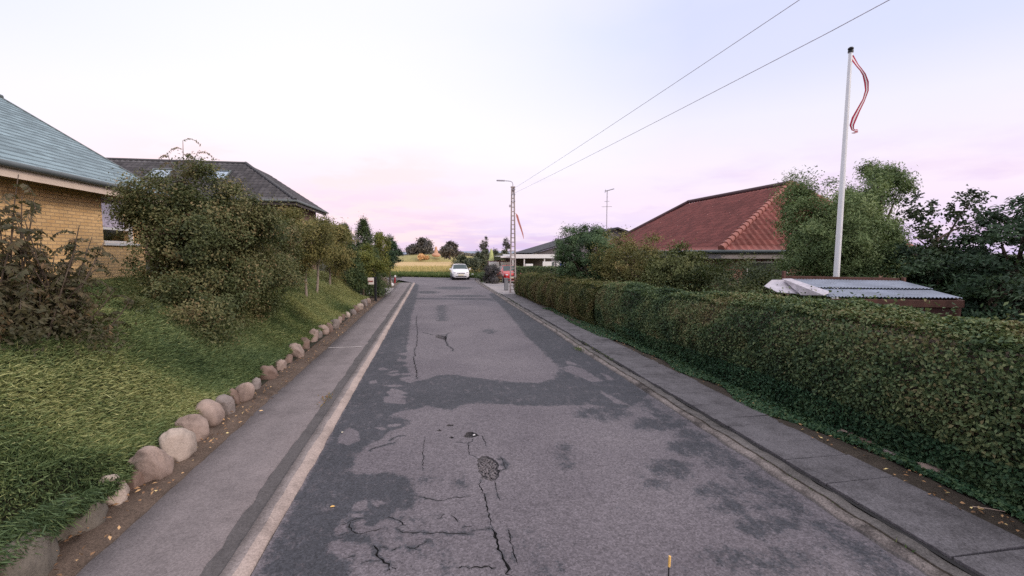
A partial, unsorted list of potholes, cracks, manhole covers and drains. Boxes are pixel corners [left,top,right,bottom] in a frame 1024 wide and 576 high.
pothole [476,456,500,481]
crack [413,320,453,379]
crack [339,436,518,576]
